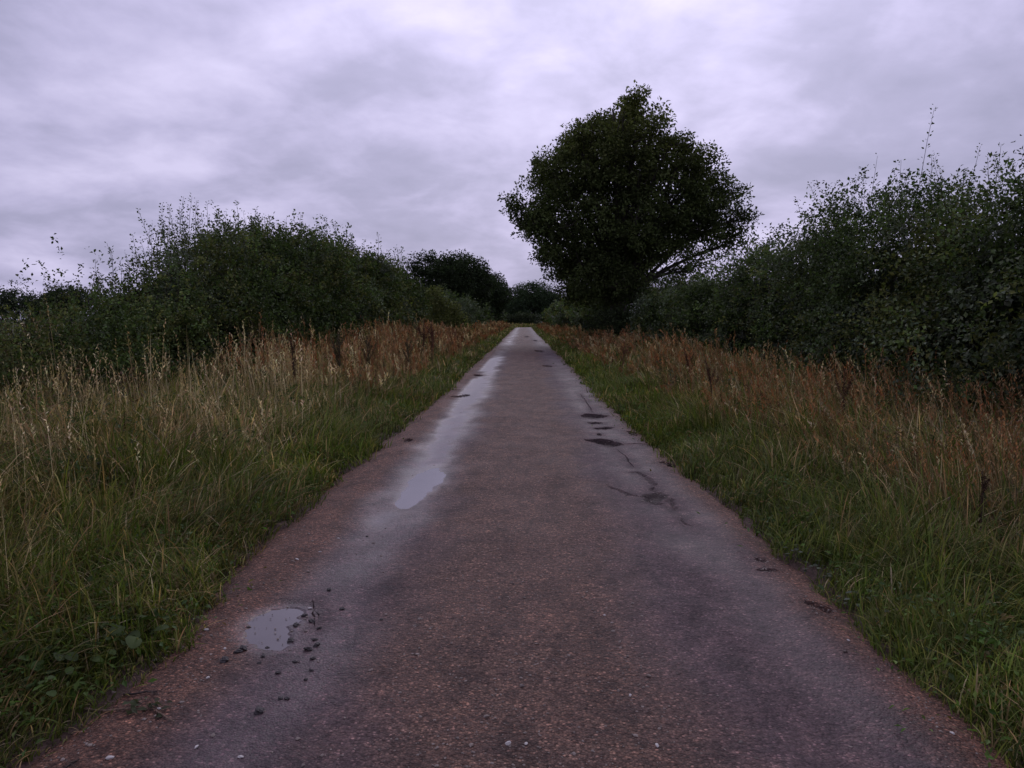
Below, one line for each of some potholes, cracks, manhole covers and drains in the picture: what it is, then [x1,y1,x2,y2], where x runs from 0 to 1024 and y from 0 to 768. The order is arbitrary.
pothole [802,600,835,614]
pothole [584,439,624,447]
crack [608,443,691,526]
pothole [234,606,314,653]
